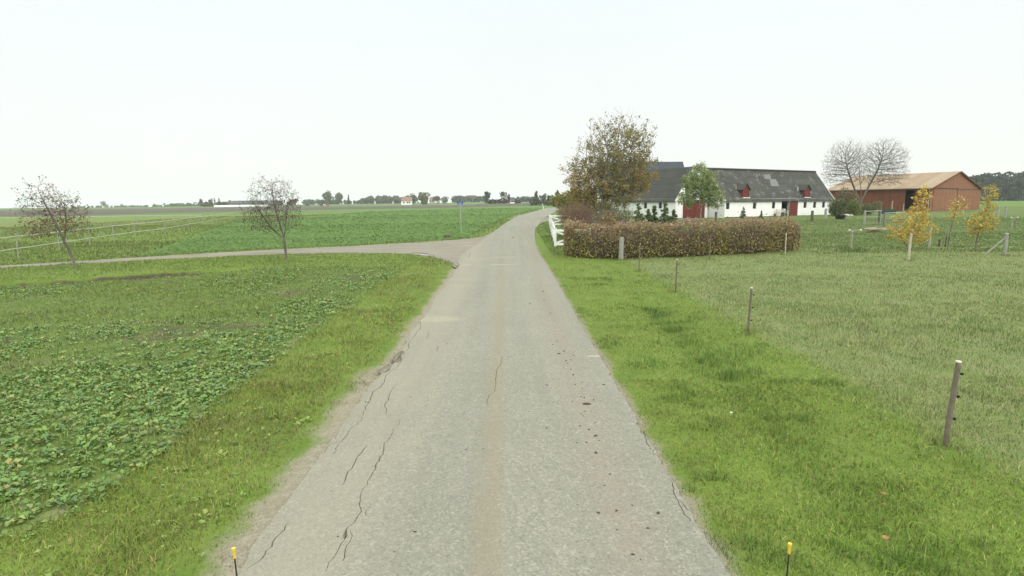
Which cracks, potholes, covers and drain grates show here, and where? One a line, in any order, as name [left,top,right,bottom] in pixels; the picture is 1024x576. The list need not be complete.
crack [324,322,438,570]
crack [671,480,691,521]
crack [247,522,289,569]
